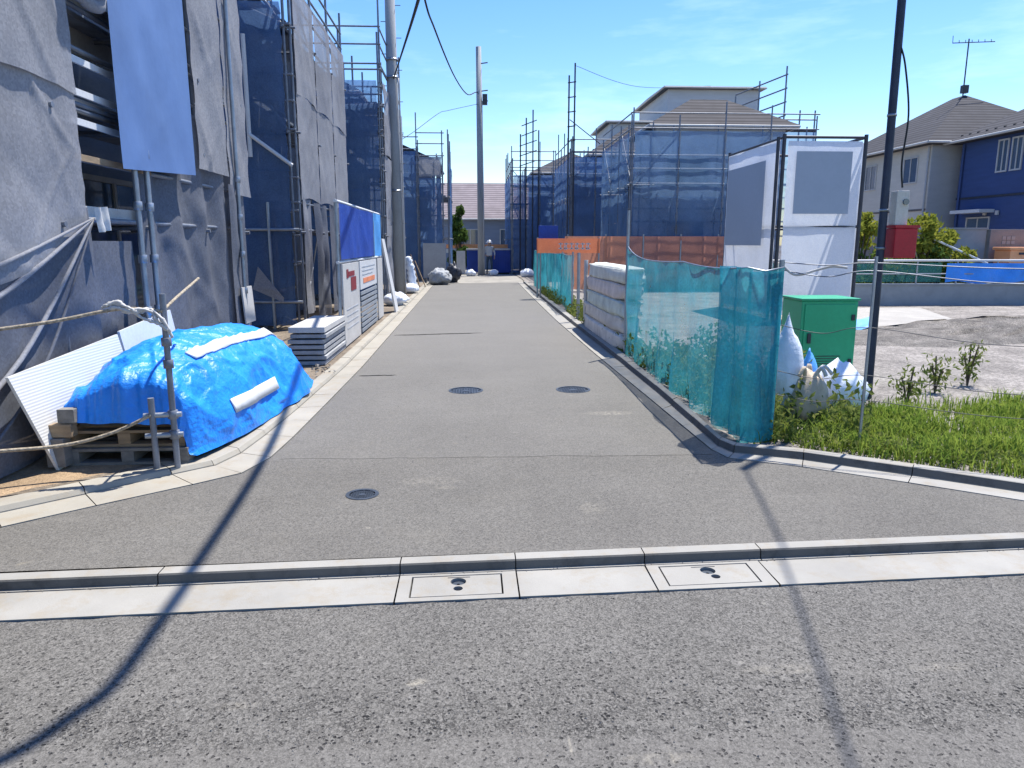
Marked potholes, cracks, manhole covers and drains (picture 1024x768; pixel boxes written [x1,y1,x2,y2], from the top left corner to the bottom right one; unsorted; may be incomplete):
manhole cover [345,488,379,500]
